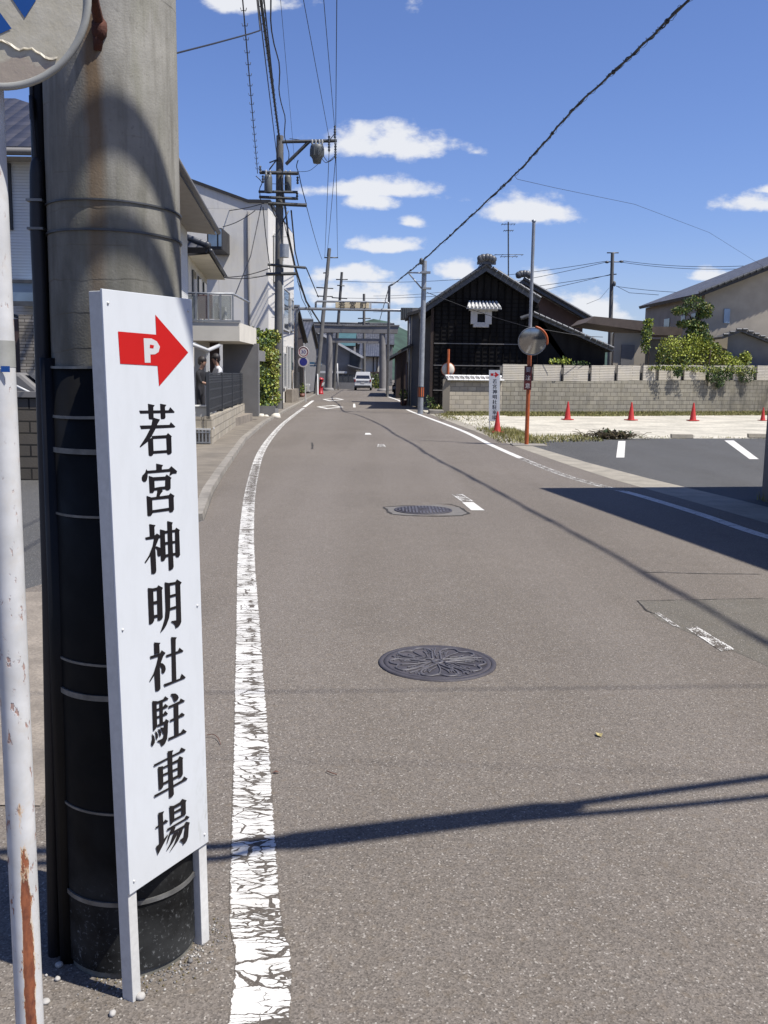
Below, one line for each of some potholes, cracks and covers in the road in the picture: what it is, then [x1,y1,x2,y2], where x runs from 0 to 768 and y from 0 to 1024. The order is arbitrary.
manhole cover [385,505,466,515]
manhole cover [379,645,496,682]
